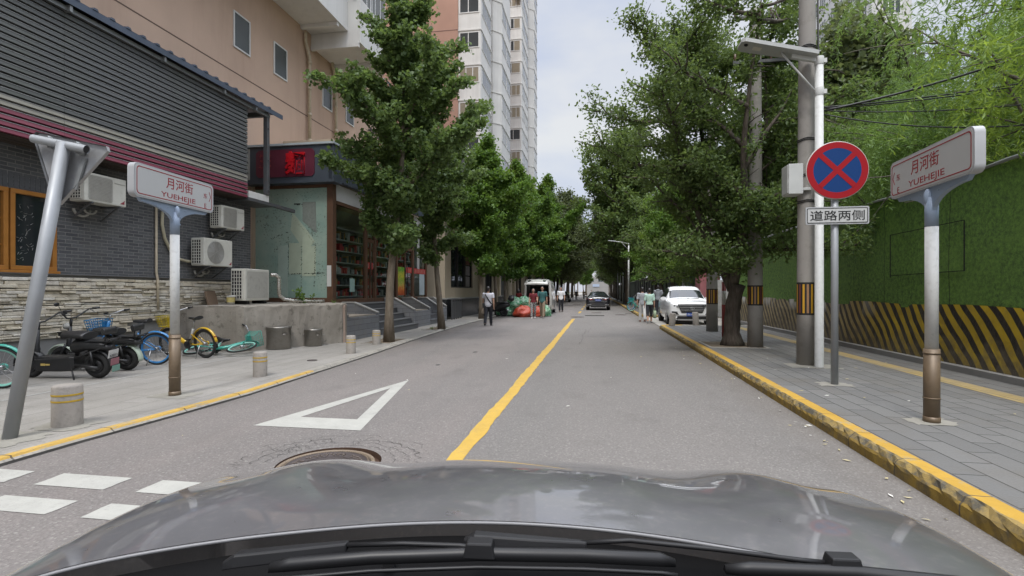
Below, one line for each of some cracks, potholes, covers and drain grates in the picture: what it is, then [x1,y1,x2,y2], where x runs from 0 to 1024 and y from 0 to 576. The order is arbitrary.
crack [221,435,423,467]
manhole cover [274,447,382,468]
